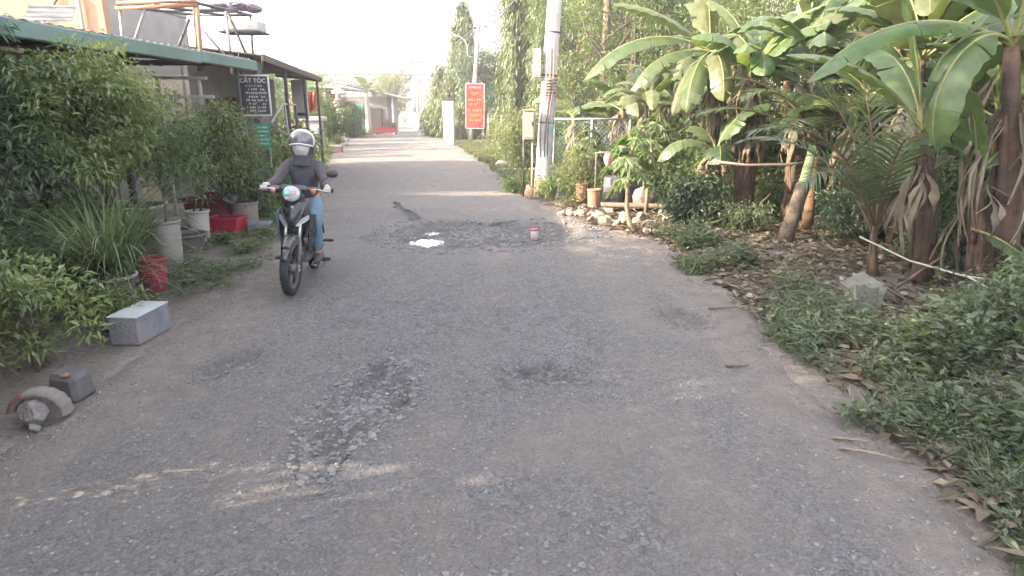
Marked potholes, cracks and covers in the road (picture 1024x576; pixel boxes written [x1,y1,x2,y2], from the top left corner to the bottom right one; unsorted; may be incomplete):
pothole [649,306,720,332]
pothole [495,358,601,387]
pothole [281,346,427,496]
